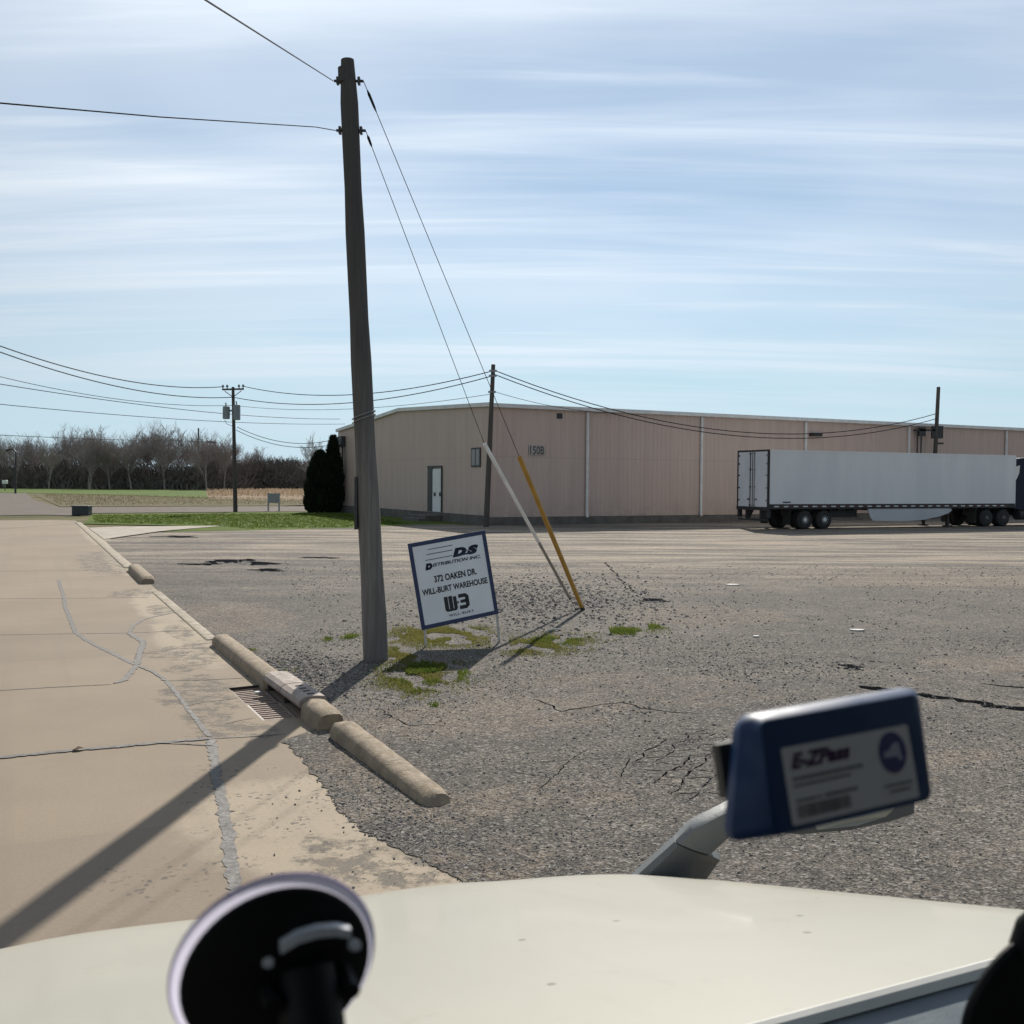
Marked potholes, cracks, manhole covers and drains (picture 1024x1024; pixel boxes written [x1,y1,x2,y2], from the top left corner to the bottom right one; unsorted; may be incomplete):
crack [535,699,684,713]
crack [507,729,724,802]
crack [858,683,1024,711]
crack [604,562,642,596]
drain grate [229,671,328,720]
